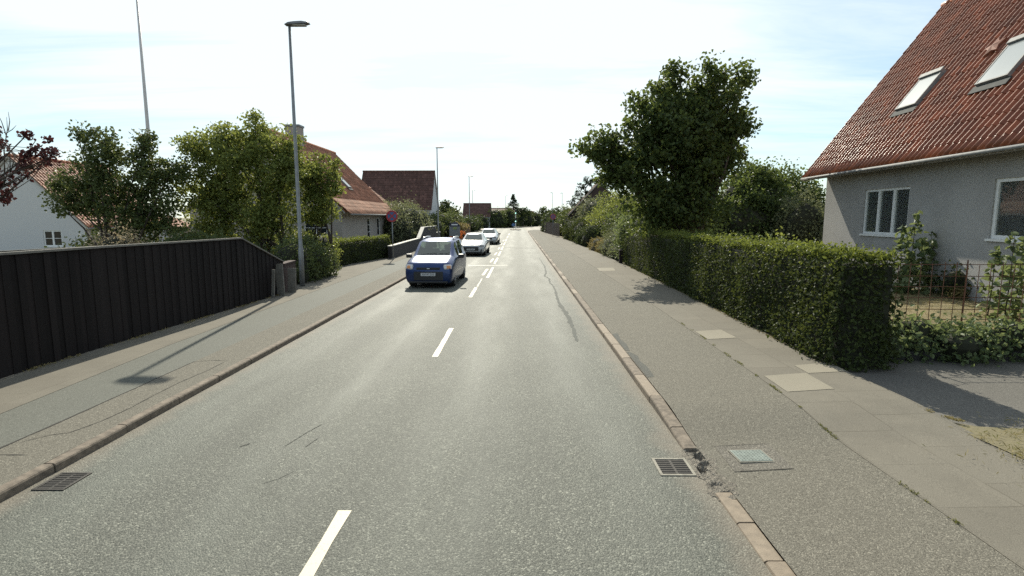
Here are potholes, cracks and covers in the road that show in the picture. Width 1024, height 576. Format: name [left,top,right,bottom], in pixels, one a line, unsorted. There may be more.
drain grate [31,472,92,491]
pothole [681,445,740,503]
drain grate [651,458,697,476]
manhole cover [728,449,775,463]
